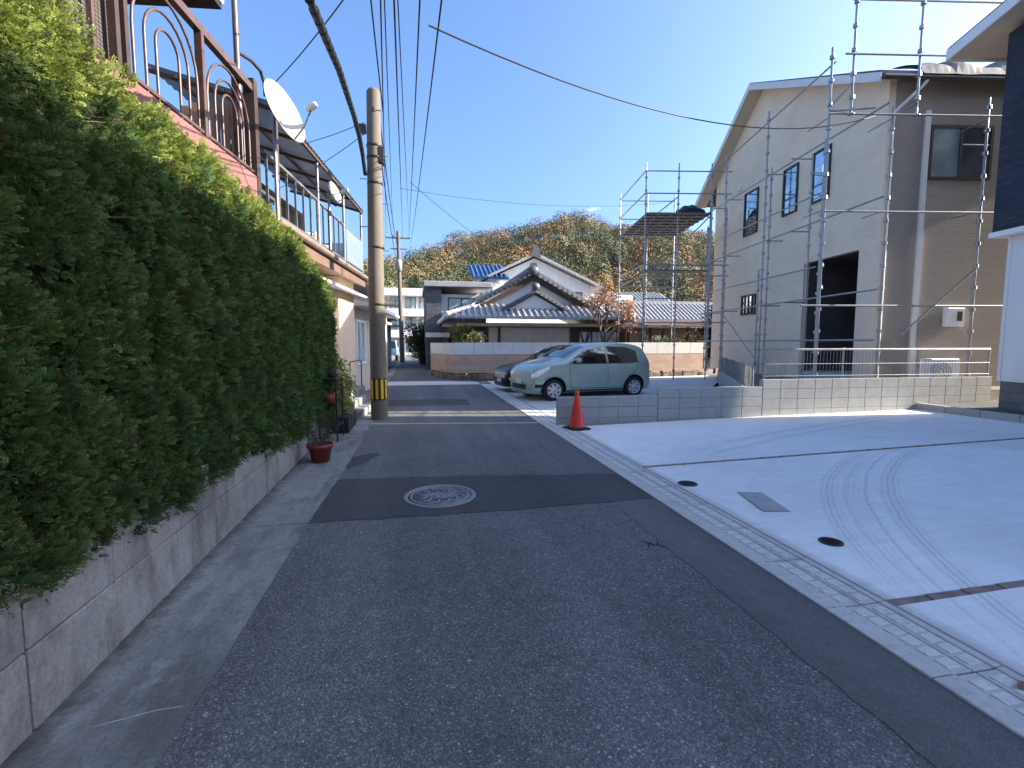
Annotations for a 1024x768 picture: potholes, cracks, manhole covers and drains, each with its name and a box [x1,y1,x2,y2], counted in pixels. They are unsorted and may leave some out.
manhole cover [818,537,844,547]
crack [93,705,187,727]
manhole cover [403,484,476,508]
